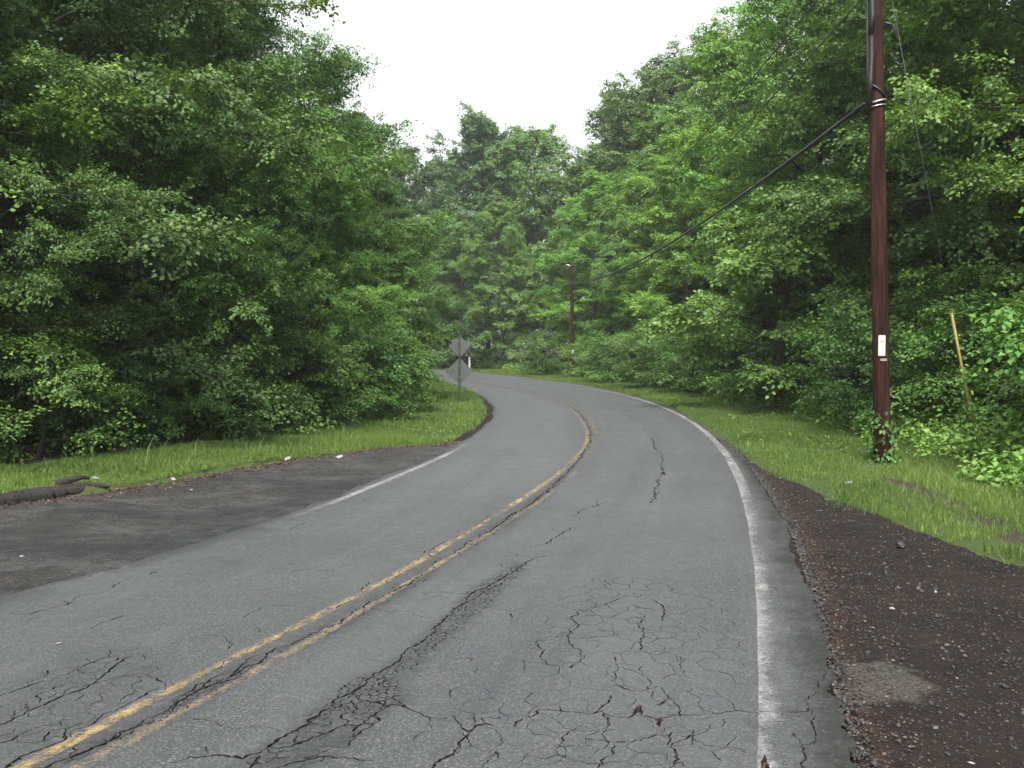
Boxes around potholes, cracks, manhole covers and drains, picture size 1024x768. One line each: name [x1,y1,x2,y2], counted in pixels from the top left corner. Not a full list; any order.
crack [0,407,827,768]
